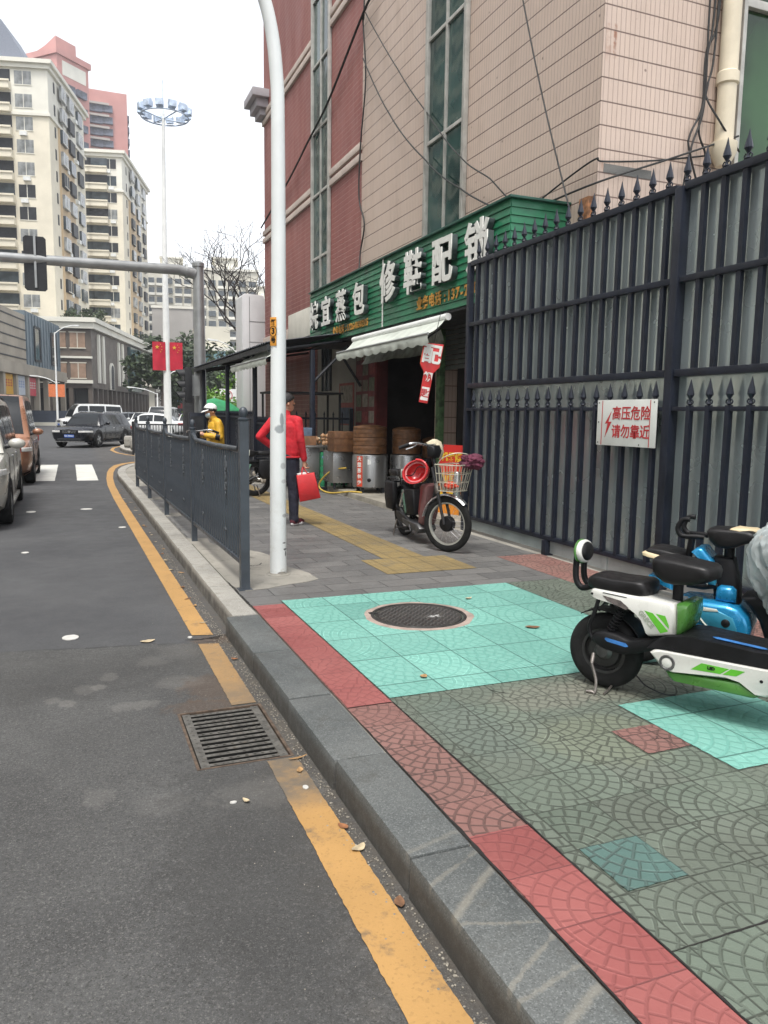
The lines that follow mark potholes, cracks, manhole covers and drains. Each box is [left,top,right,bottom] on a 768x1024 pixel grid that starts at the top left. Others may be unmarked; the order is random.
drain grate [177,703,294,771]
manhole cover [364,602,474,631]
